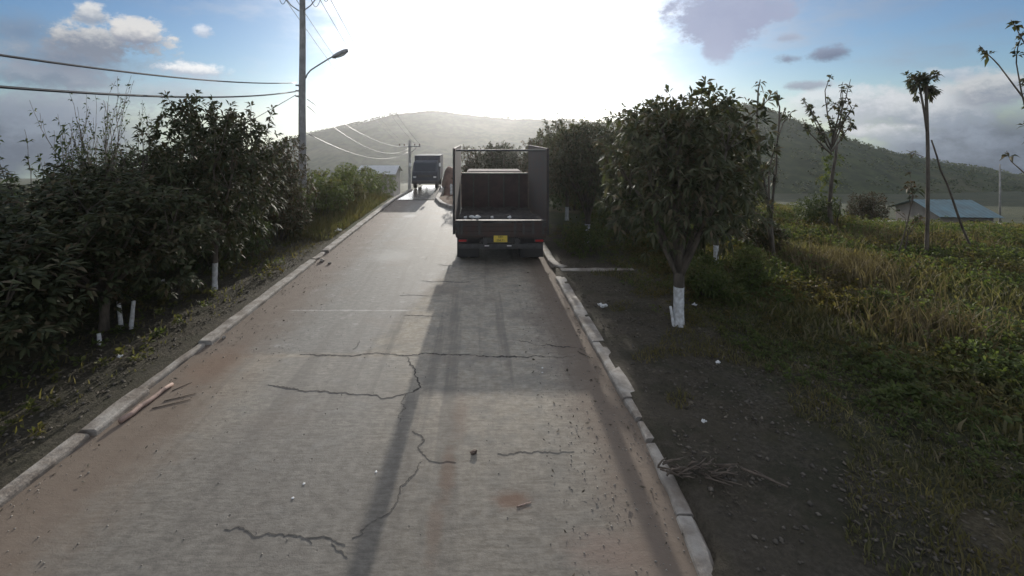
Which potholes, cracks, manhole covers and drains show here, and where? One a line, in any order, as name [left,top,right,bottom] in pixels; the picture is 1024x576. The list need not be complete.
crack [224,340,577,558]
